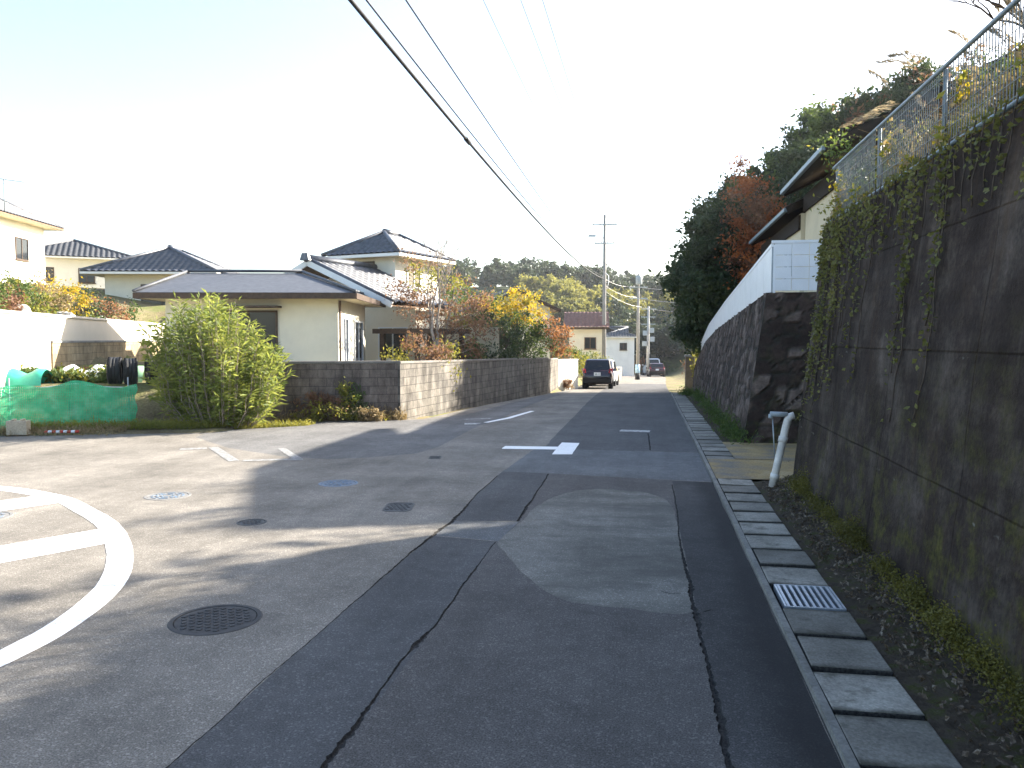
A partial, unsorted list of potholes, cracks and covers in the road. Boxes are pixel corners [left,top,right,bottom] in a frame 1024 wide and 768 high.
manhole cover [144,491,192,500]
manhole cover [167,604,263,636]
crack [517,474,549,521]
drain grate [773,584,847,612]
crack [166,476,497,768]
crack [658,486,735,768]
